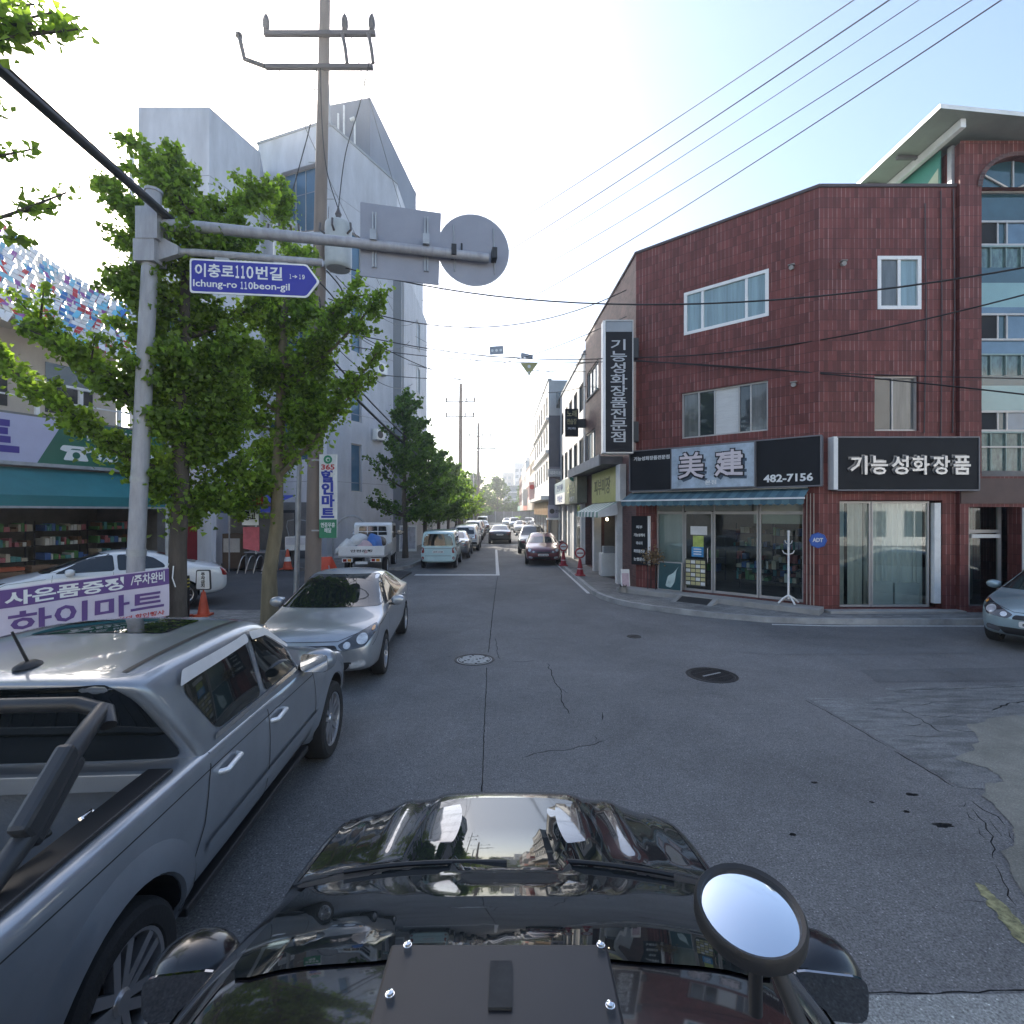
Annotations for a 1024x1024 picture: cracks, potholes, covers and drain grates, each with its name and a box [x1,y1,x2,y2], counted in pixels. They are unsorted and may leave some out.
manhole cover [454,654,495,666]
crack [964,801,1015,904]
manhole cover [685,667,739,683]
